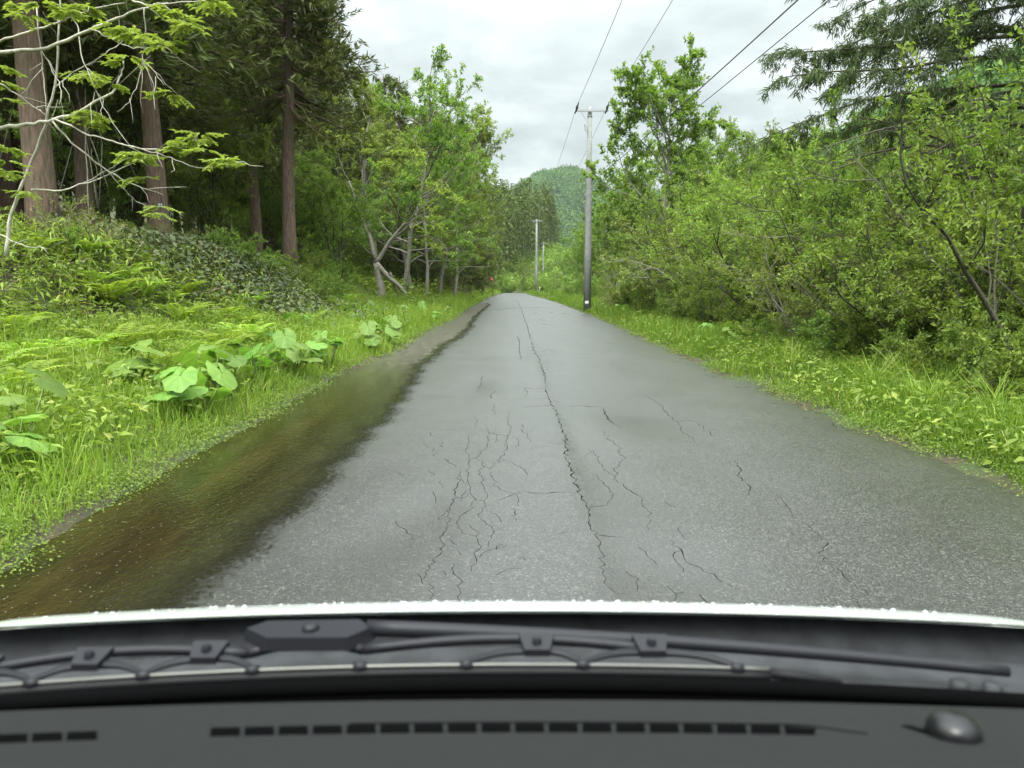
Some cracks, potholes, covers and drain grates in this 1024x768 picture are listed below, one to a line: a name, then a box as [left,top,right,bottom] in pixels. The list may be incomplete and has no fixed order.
crack [570,406,676,530]
crack [418,404,563,601]
crack [625,527,733,603]
